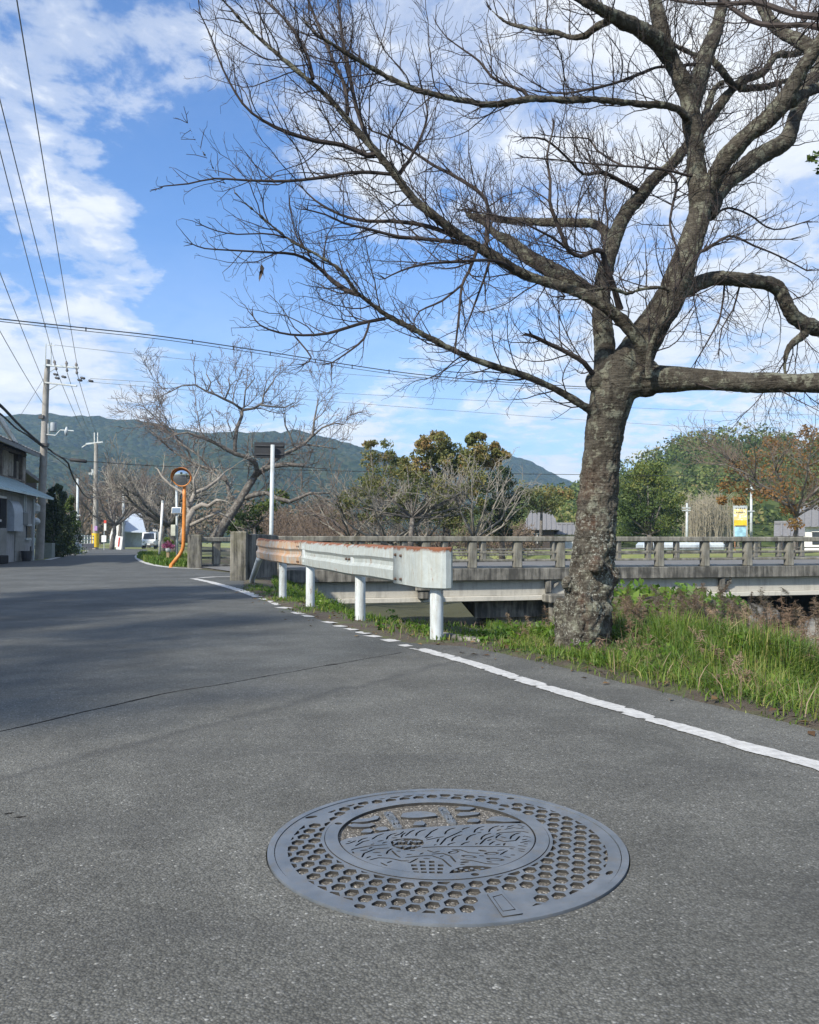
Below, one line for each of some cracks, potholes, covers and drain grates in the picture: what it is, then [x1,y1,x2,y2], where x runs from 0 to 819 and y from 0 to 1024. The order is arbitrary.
manhole cover [267,789,629,928]
